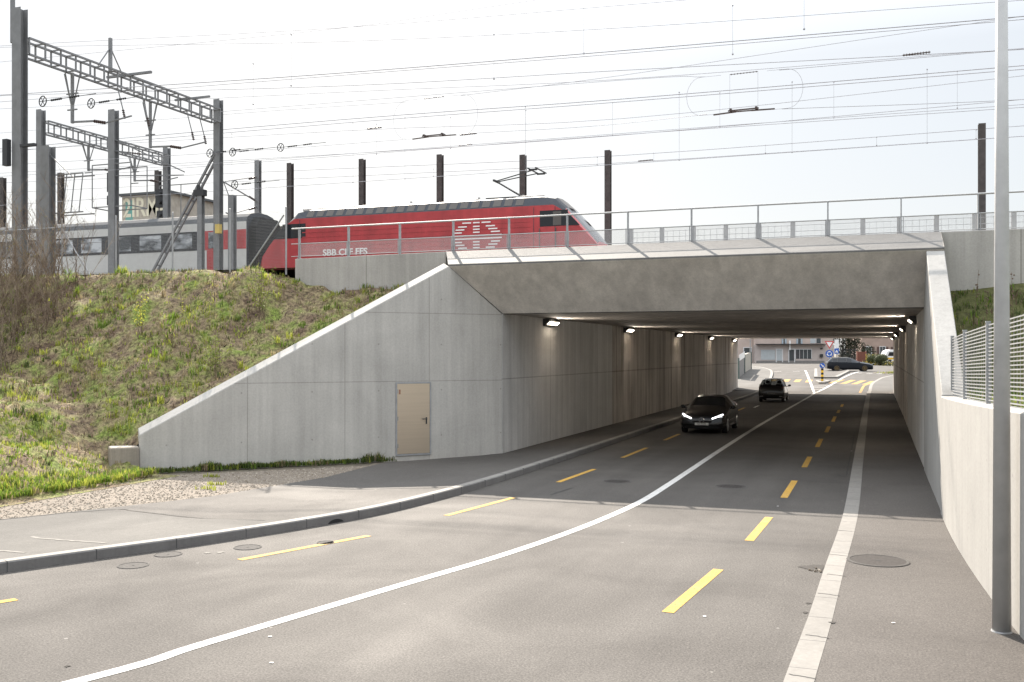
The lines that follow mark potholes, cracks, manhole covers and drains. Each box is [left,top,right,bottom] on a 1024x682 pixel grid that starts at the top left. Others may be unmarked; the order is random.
manhole cover [846,554,910,567]
